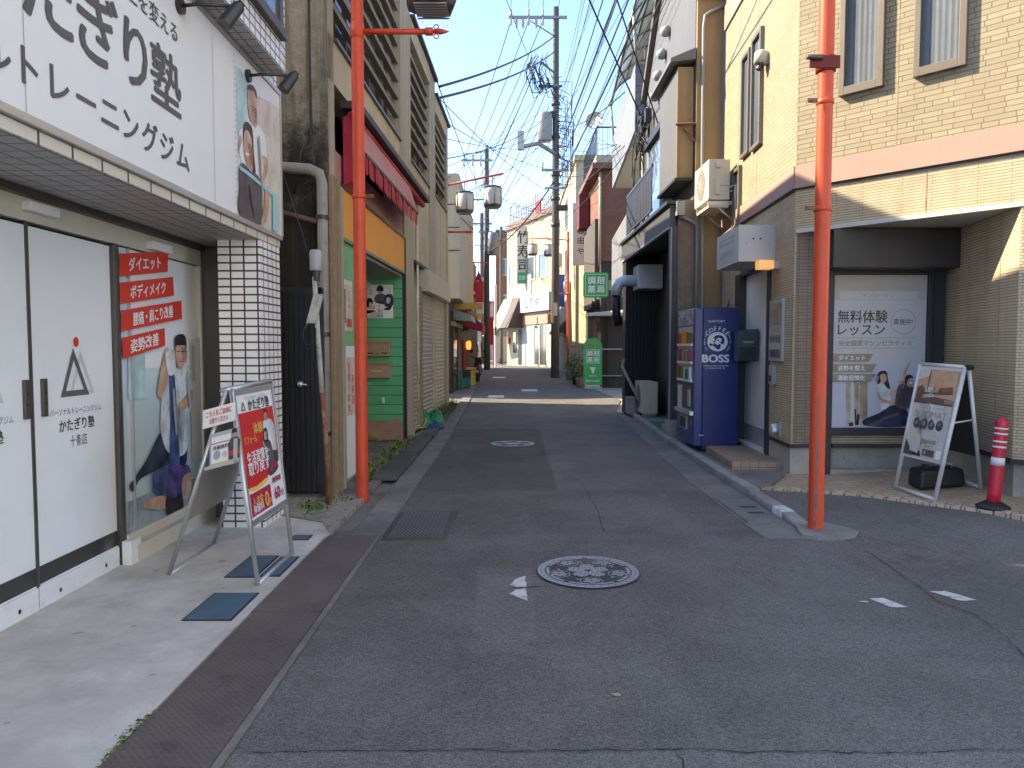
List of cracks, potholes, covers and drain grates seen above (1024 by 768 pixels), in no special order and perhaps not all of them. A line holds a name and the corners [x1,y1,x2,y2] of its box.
crack [846,538,1024,655]
manhole cover [536,556,641,589]
